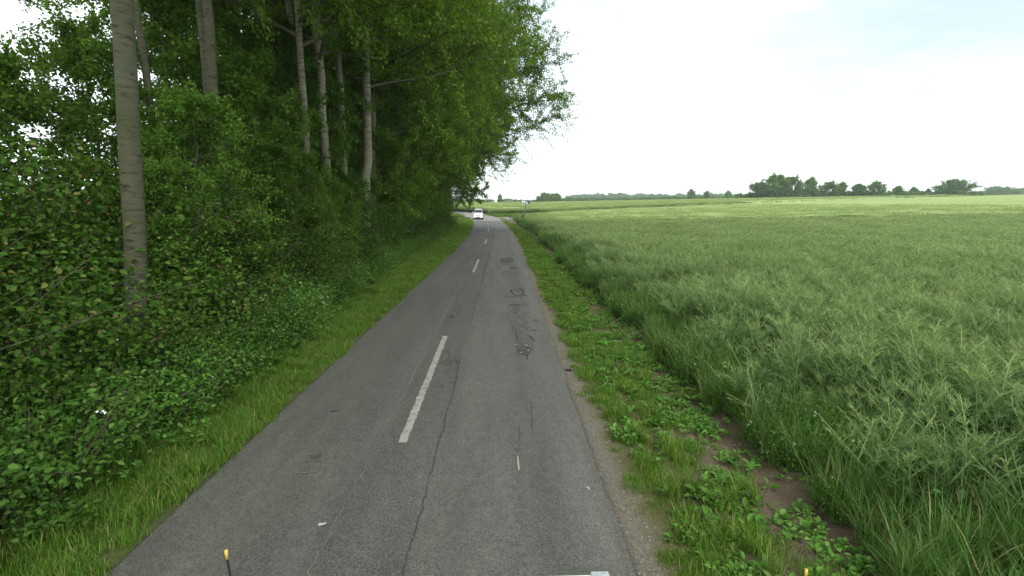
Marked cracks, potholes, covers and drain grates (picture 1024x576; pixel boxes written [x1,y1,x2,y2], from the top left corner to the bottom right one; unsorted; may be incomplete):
crack [451,259,513,329]
